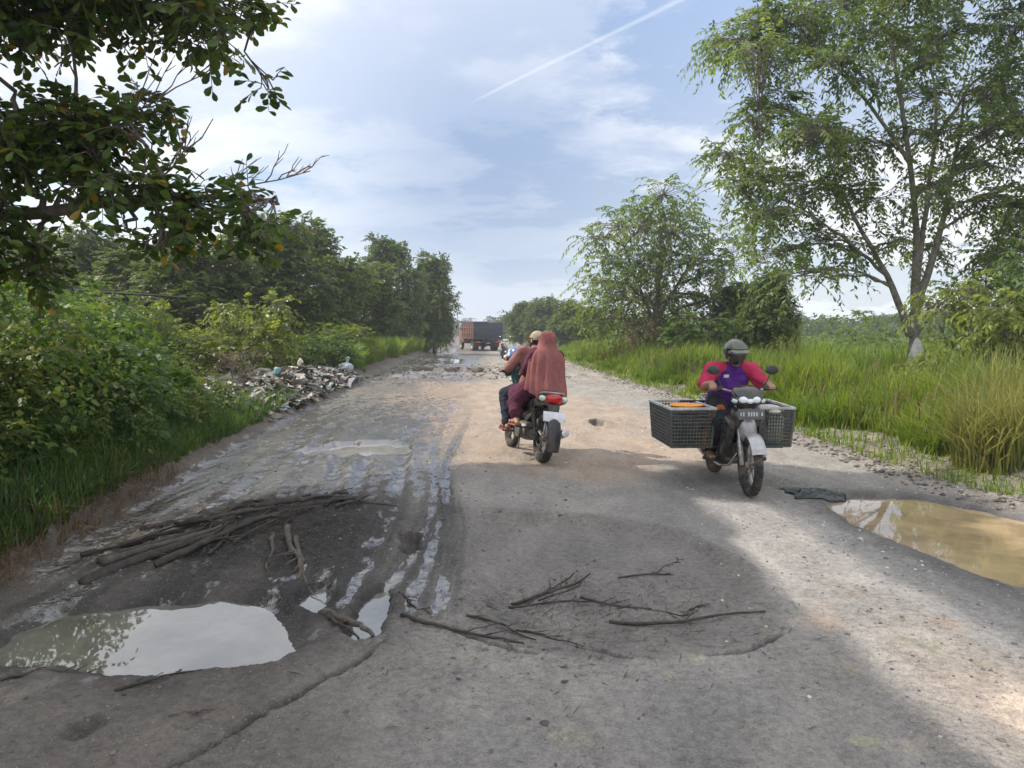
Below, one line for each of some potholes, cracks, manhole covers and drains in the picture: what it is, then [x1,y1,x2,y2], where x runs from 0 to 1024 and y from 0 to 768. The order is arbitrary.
pothole [0,581,358,685]
pothole [284,439,429,458]
pothole [395,529,425,555]
pothole [466,366,489,374]
pothole [807,491,1024,591]
pothole [335,580,406,641]
pothole [587,418,606,426]
